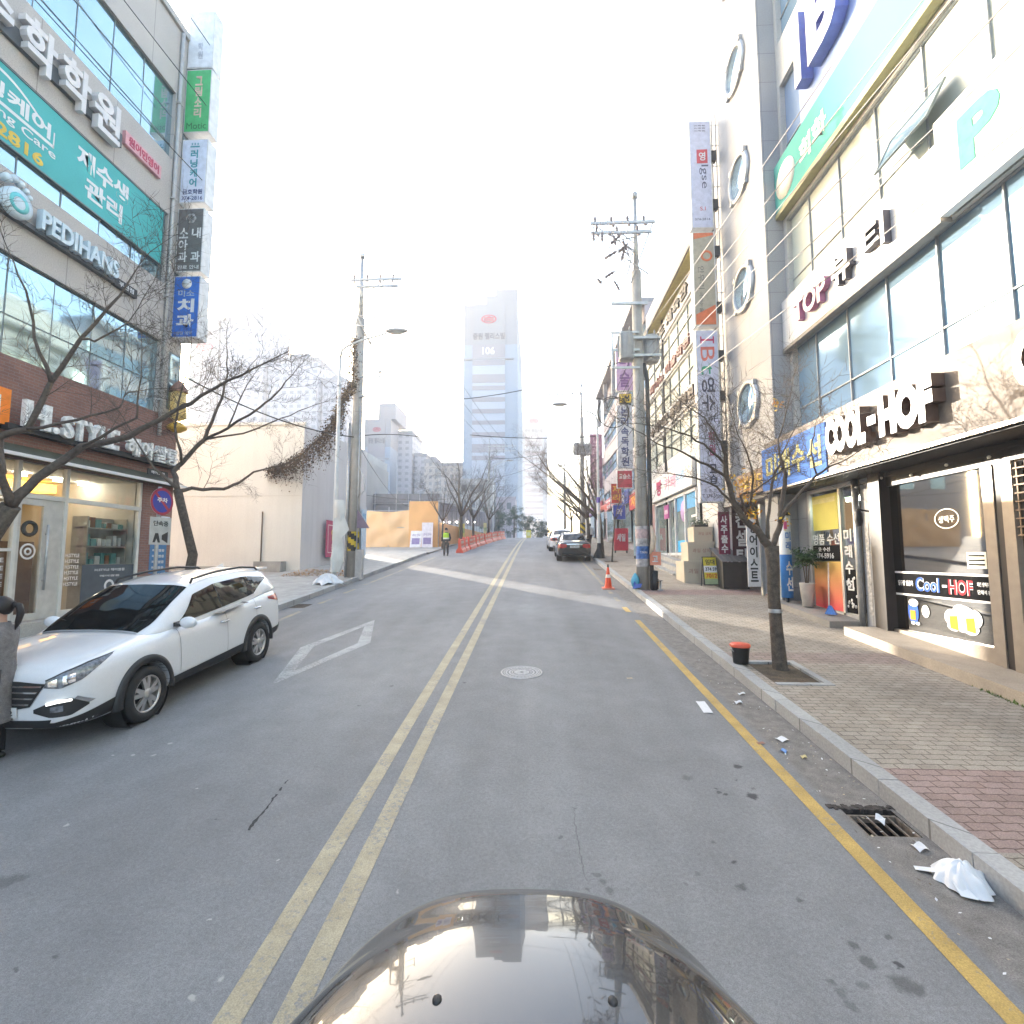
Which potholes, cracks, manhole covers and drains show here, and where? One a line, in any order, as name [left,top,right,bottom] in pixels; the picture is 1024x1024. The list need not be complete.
manhole cover [501,666,543,679]
crack [248,780,288,830]
crack [573,809,587,881]
drain grate [825,804,923,838]
